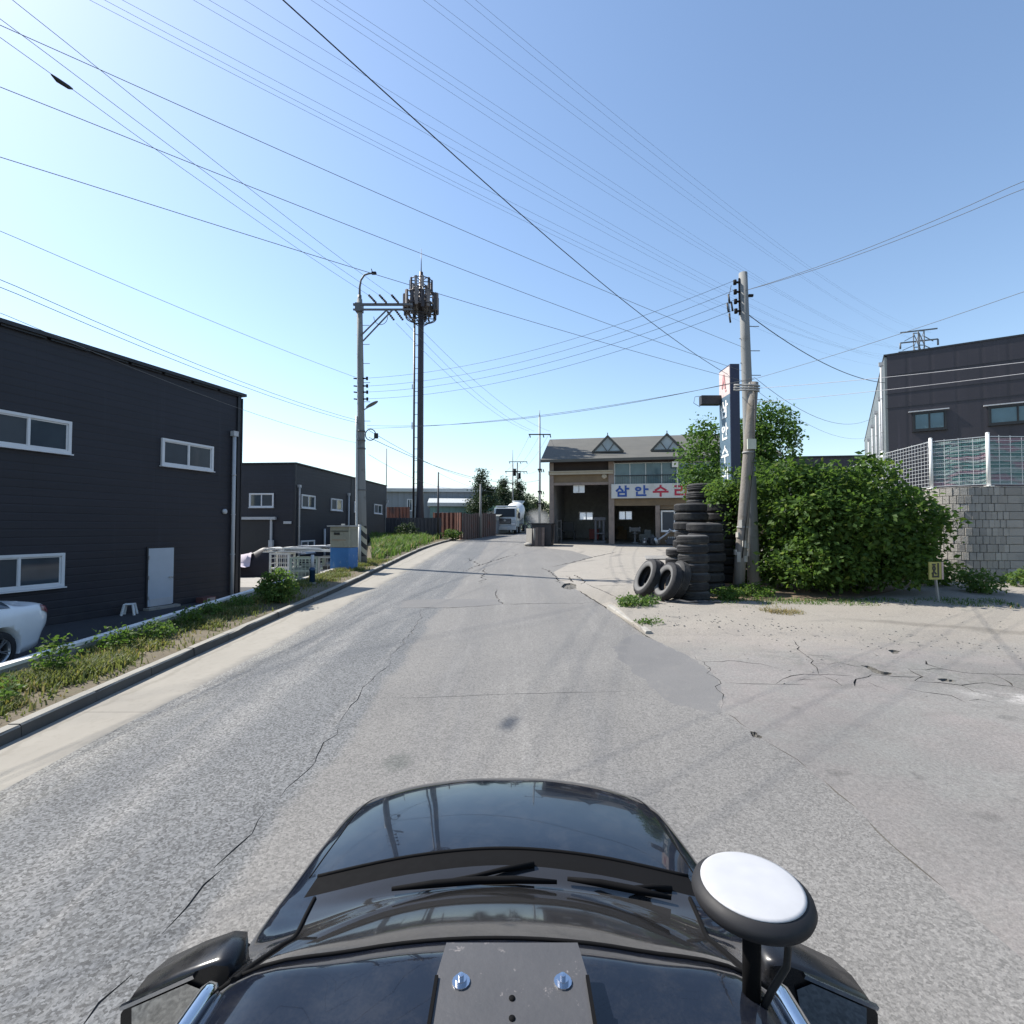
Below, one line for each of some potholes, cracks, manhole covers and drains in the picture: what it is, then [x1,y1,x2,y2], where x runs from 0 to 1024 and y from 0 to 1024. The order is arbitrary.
crack [695,641,1022,708]
crack [84,553,589,1024]
